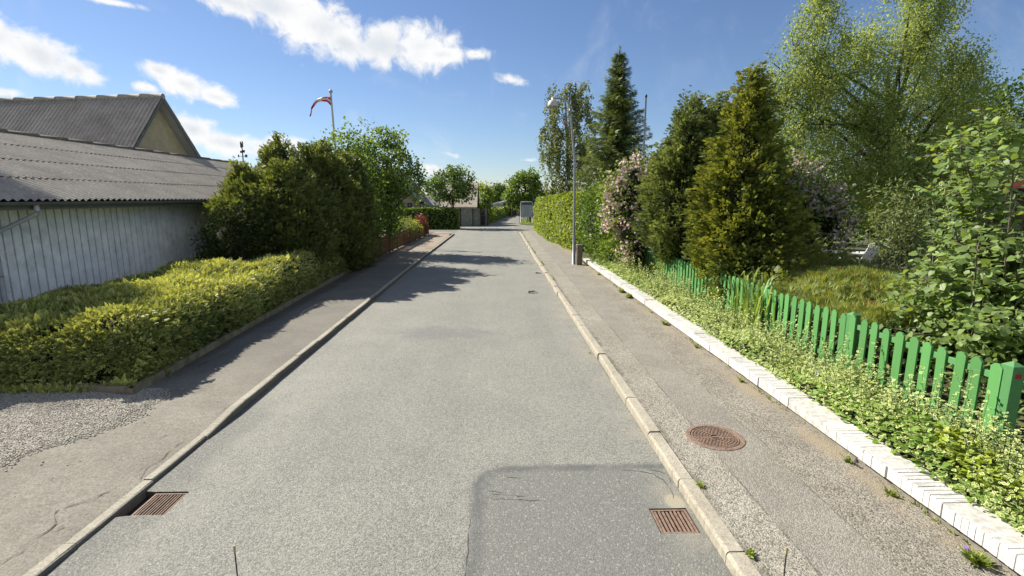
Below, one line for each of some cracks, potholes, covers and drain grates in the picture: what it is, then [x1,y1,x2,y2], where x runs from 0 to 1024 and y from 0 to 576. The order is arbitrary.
manhole cover [685,425,746,451]
crack [2,491,109,563]
drain grate [125,491,190,516]
drain grate [649,508,701,534]
